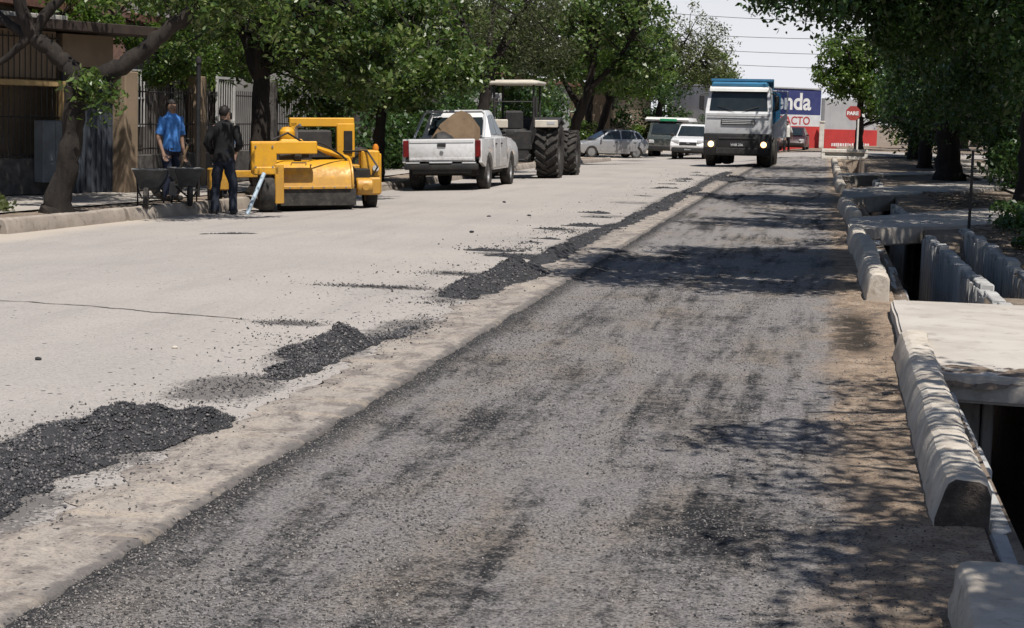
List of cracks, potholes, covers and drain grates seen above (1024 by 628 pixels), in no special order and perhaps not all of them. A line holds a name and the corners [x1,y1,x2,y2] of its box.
crack [0,300,248,320]
